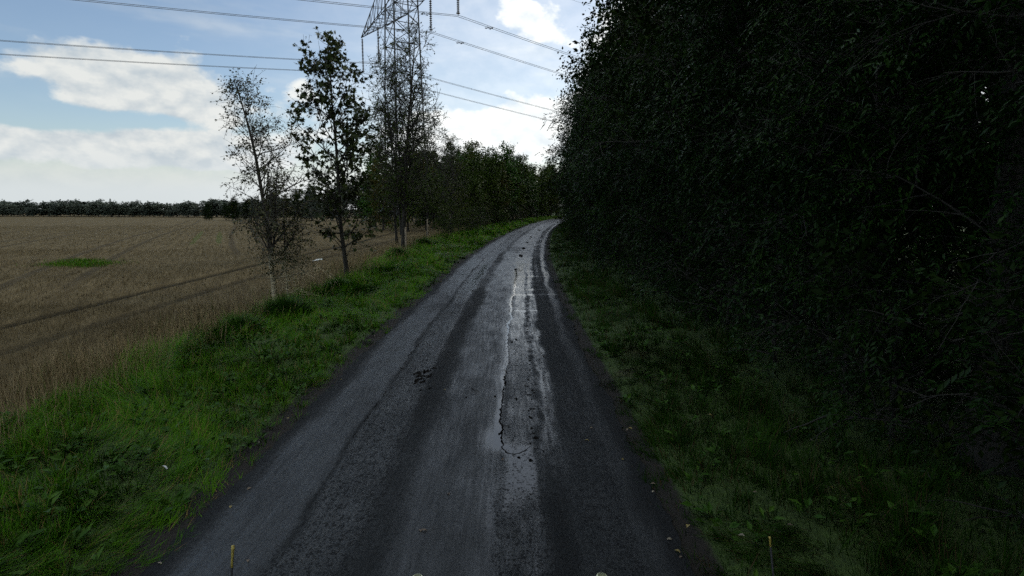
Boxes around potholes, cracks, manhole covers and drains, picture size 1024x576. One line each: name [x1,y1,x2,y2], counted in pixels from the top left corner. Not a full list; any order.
pothole [413,359,437,391]
